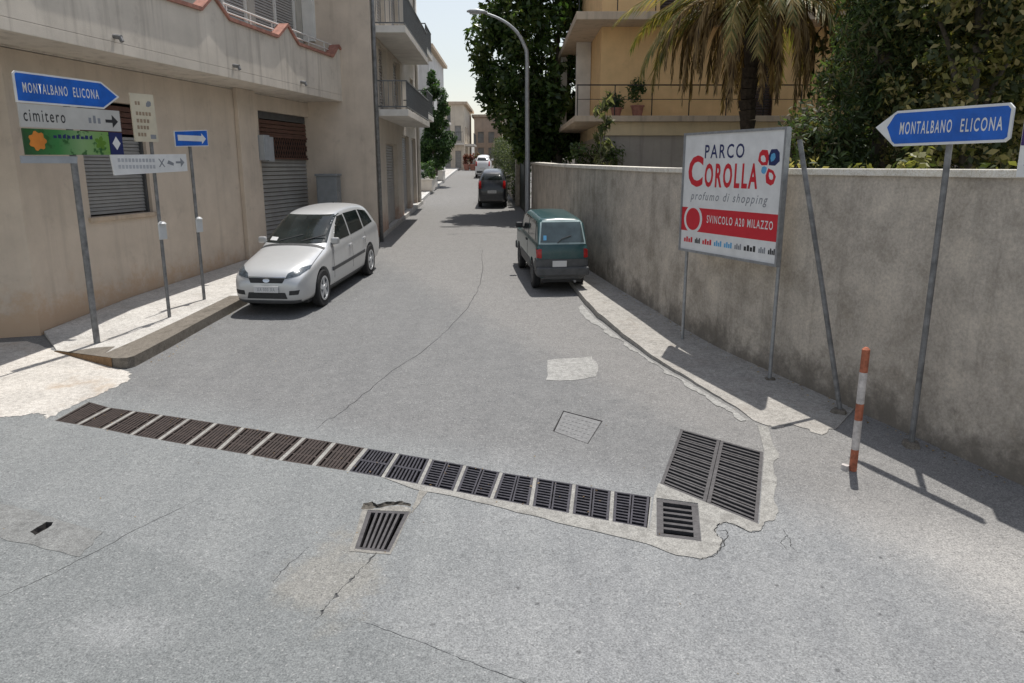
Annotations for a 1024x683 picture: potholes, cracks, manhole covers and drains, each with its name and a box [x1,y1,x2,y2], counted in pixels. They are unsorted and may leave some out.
drain grate [660,429,763,523]
drain grate [573,485,611,521]
drain grate [161,419,214,444]
drain grate [657,499,701,541]
manhole cover [553,411,602,444]
drain grate [134,415,186,439]
drain grate [613,491,650,528]
drain grate [56,402,108,424]
crack [315,262,483,430]
crack [318,554,376,618]
drain grate [316,443,364,470]
drain grate [80,408,132,429]
